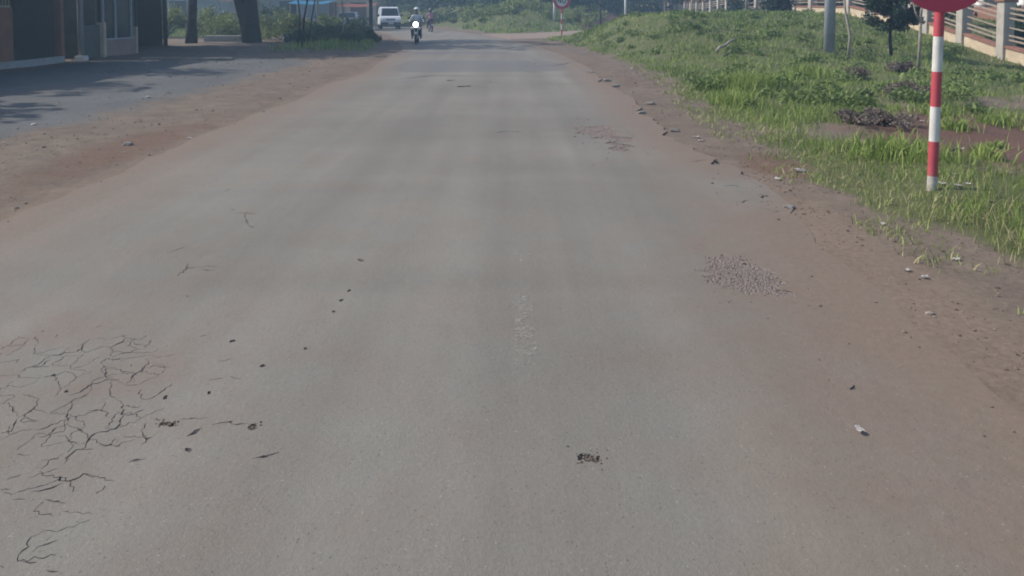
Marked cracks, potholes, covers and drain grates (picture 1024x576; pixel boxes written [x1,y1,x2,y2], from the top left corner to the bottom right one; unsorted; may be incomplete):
crack [0,325,175,573]
pothole [577,453,601,463]
